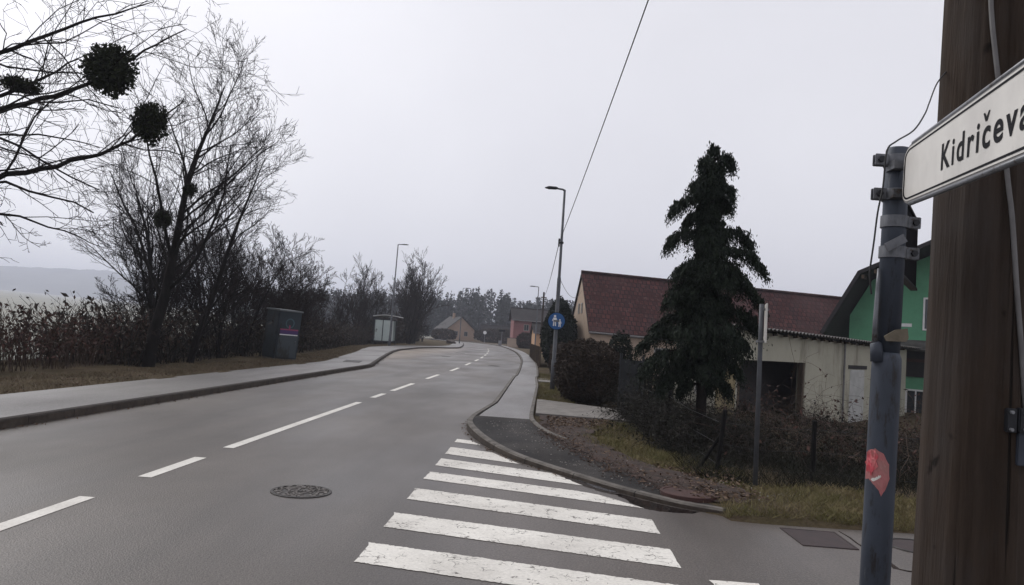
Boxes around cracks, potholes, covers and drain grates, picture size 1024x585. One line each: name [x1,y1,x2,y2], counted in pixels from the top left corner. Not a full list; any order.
manhole cover [270,485,332,498]
manhole cover [660,486,720,503]
utility cover [780,527,859,550]
manhole cover [892,538,914,553]
